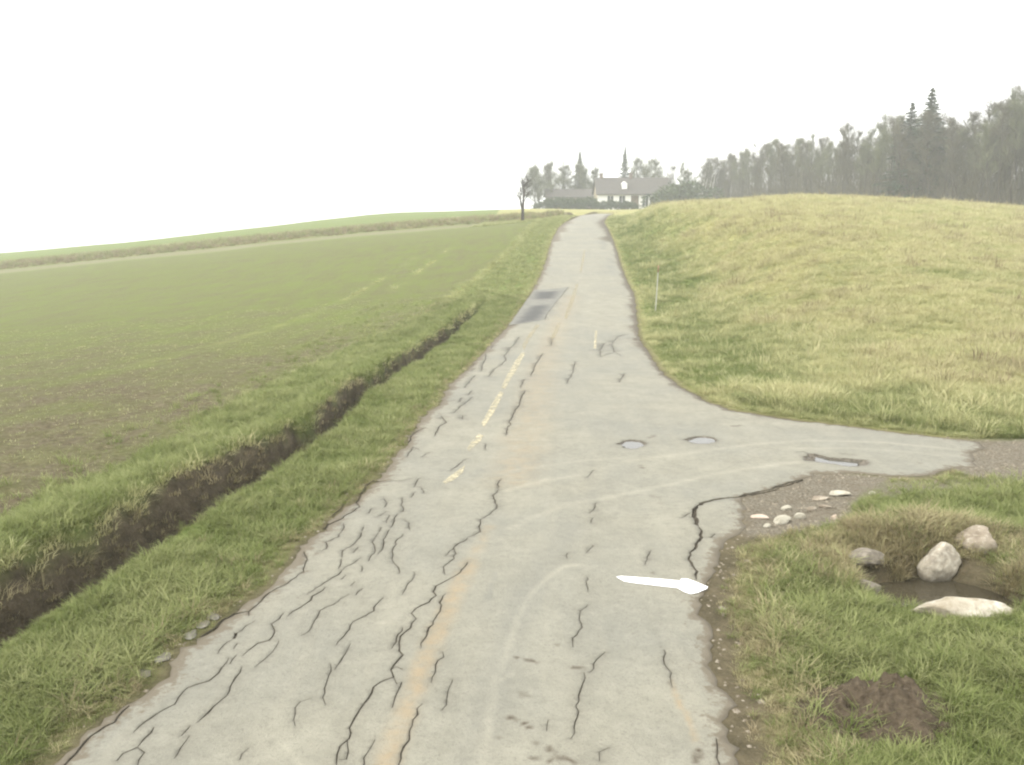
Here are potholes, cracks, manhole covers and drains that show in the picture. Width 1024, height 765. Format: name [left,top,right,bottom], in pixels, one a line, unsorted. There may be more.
pothole [617,440,646,449]
crack [571,577,608,761]
pothole [803,454,870,466]
crack [407,338,519,457]
pothole [684,436,717,444]
crack [505,355,542,436]
crack [682,479,803,580]
crack [64,480,500,765]
